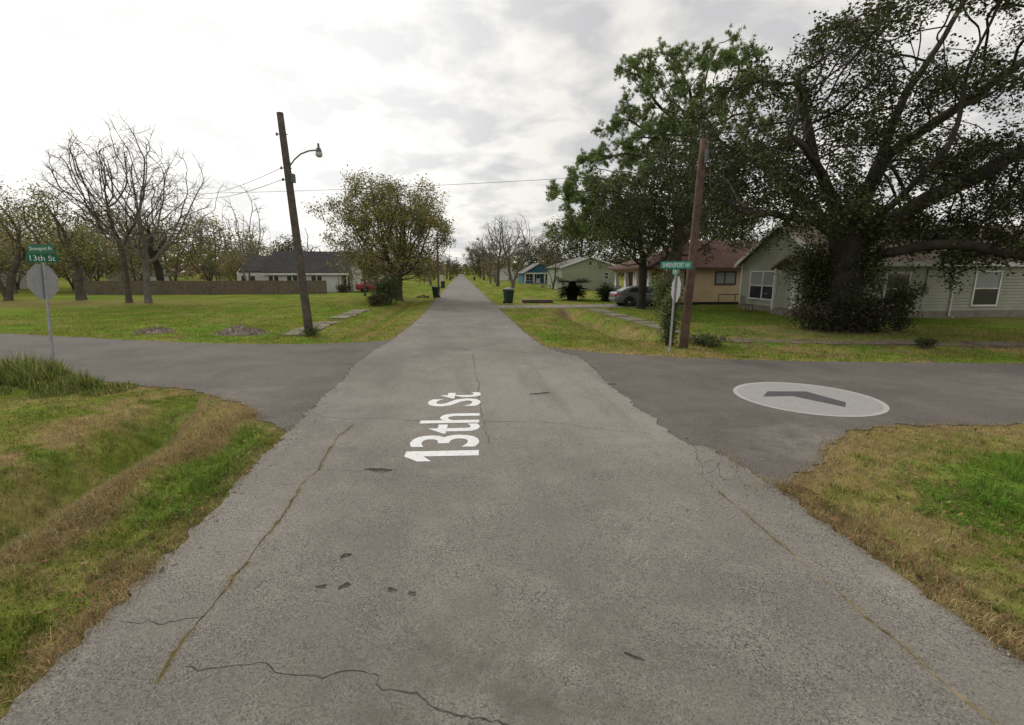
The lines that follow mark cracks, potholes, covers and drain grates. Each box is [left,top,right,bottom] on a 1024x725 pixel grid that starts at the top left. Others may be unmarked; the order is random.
crack [693,446,1005,725]
crack [121,347,647,725]
